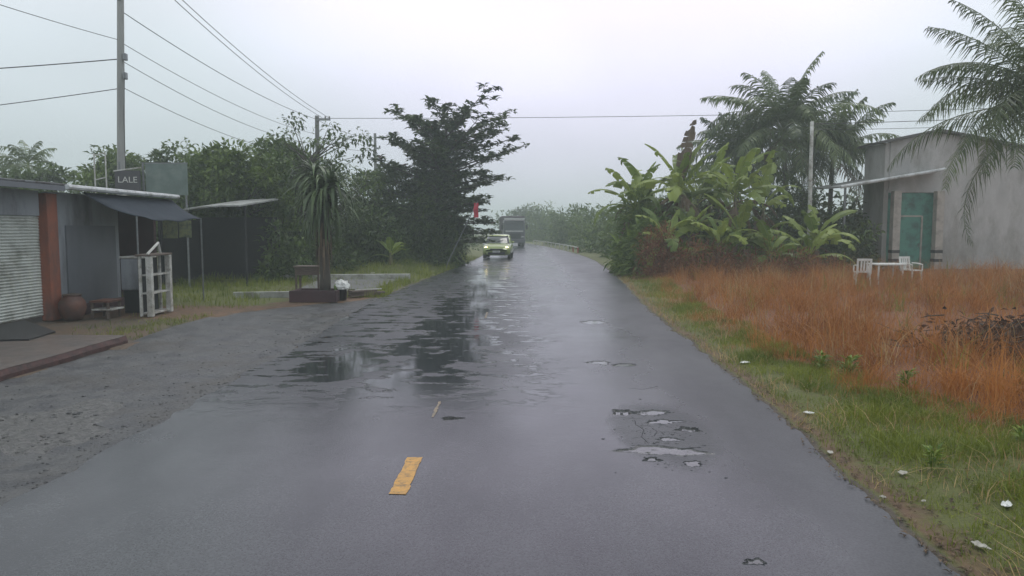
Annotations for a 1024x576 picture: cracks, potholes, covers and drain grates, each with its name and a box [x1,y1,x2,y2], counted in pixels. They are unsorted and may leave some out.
pothole [612,445,714,456]
pothole [742,557,767,565]
